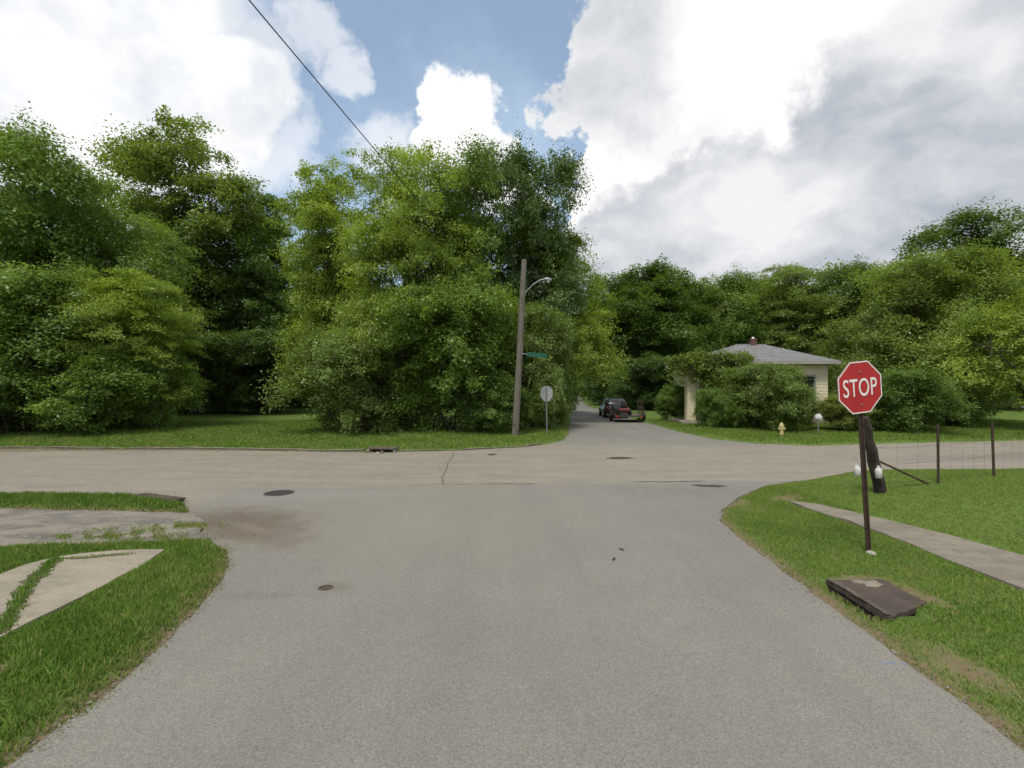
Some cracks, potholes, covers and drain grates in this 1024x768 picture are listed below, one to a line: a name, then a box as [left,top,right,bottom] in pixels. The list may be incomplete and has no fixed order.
crack [431,452,539,485]
